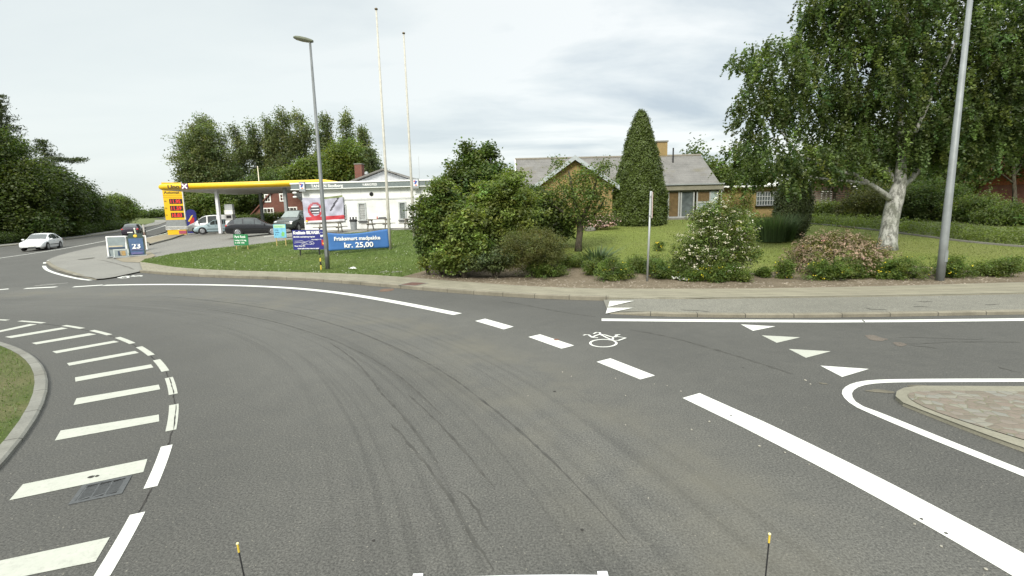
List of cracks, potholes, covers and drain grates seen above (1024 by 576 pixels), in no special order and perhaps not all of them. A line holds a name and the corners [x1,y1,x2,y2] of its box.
drain grate [68,475,132,505]
